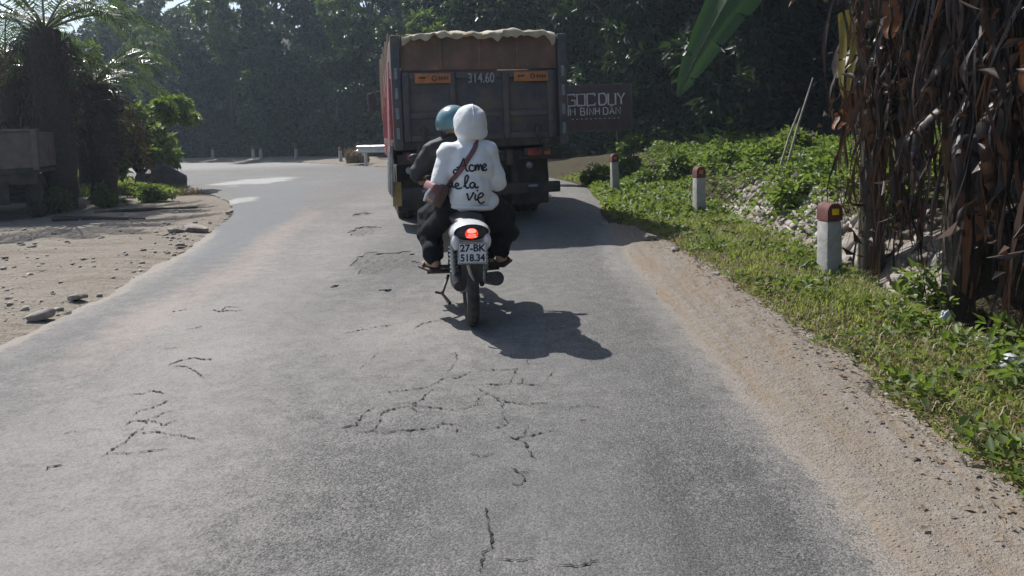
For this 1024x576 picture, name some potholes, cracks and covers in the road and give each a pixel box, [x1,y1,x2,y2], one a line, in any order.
crack [479,504,535,570]
pothole [349,251,422,275]
crack [309,352,605,433]
crack [166,347,211,376]
pothole [348,226,382,237]
crack [510,429,554,485]
crack [106,390,198,454]
